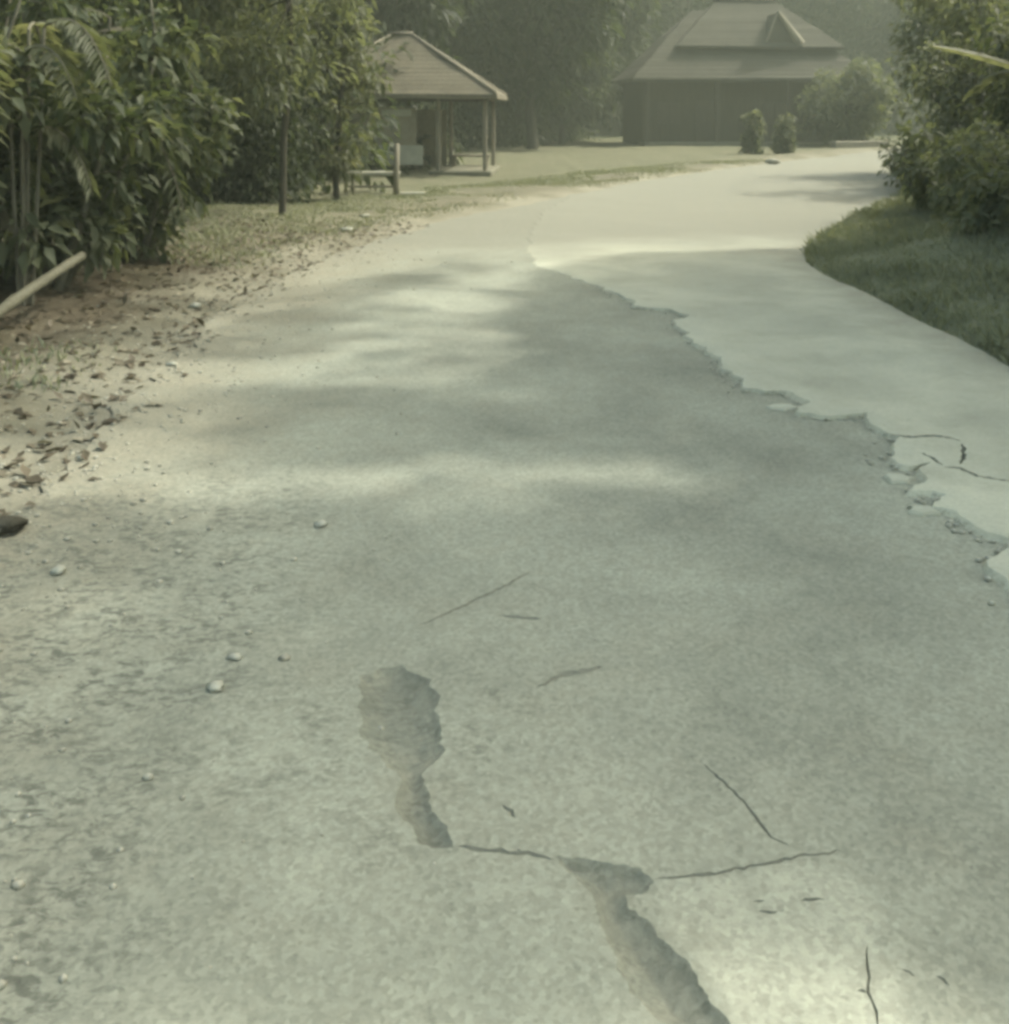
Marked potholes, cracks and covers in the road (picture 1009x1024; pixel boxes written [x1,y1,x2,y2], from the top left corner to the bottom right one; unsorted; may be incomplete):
crack [891,434,1009,481]
pothole [357,665,454,849]
crack [656,763,841,879]
crack [857,945,878,1024]
pothole [555,856,730,1024]
crack [420,572,541,625]
crack [536,666,602,688]
crack [458,845,554,860]
